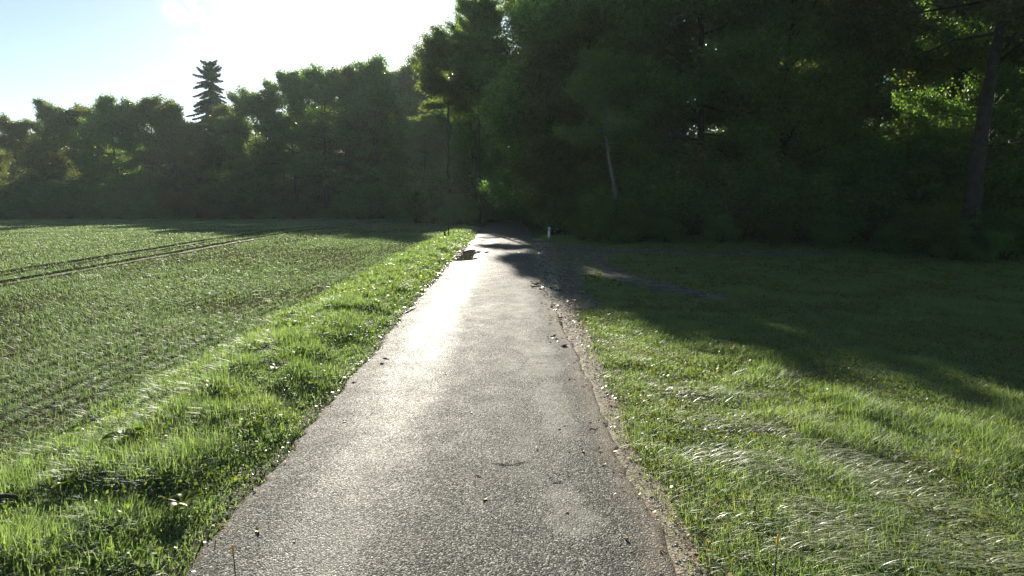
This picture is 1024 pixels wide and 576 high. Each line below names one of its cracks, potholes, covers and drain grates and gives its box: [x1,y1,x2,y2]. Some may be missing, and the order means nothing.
pothole [455,250,481,261]
